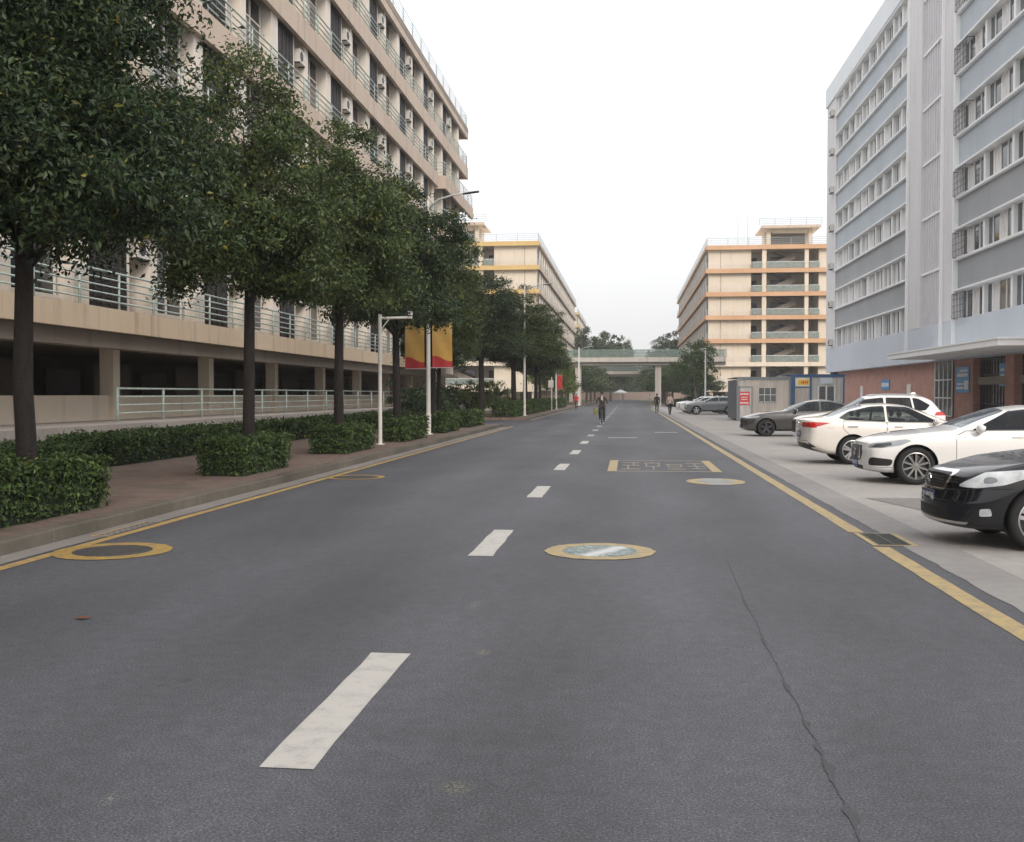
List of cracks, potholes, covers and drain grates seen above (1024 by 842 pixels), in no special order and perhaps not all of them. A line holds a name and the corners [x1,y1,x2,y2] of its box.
crack [725,557,864,842]
manhole cover [50,542,172,560]
manhole cover [544,543,656,559]
drain grate [854,533,919,546]
